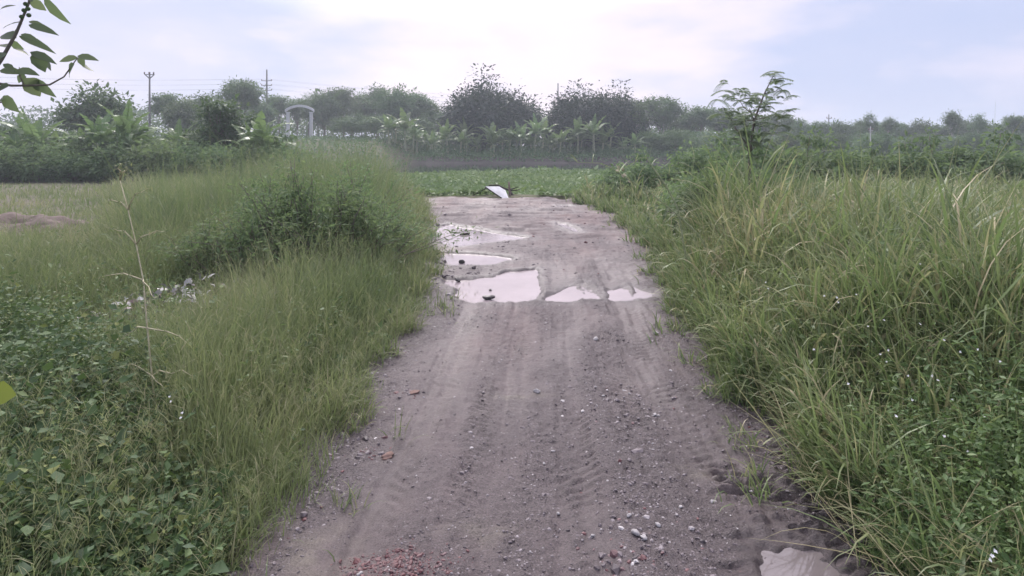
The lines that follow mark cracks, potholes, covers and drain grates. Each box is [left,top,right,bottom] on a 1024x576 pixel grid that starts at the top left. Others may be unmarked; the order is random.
pothole [427,221,534,248]
pothole [433,266,555,305]
pothole [435,250,522,267]
